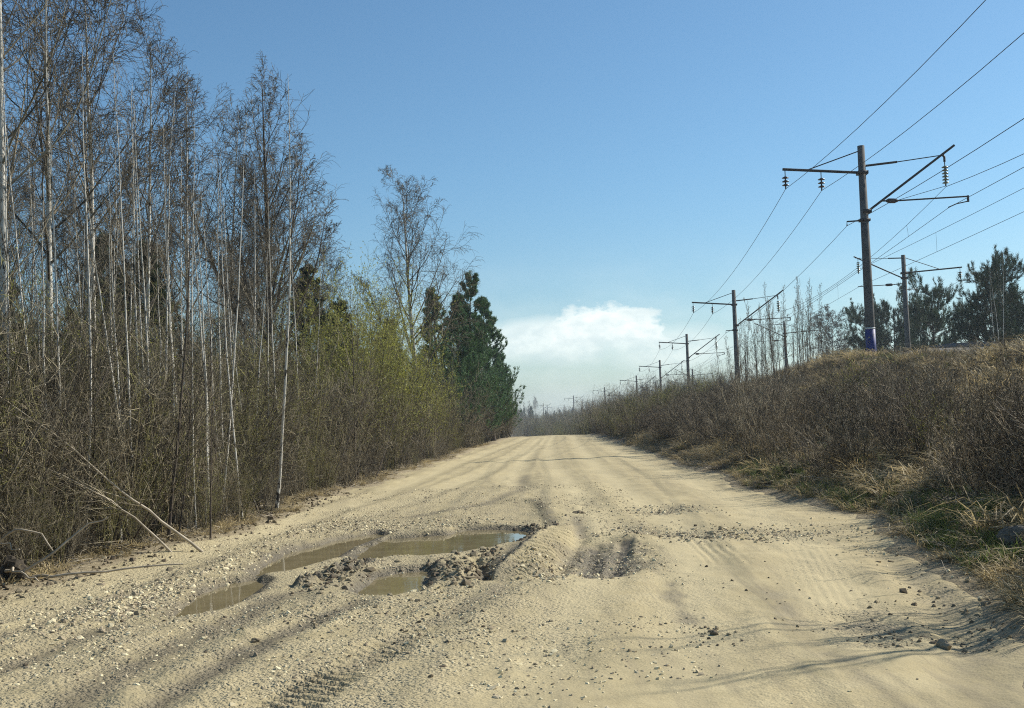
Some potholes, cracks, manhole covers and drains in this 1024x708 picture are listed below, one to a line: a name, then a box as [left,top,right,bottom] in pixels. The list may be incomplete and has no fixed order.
pothole [346,561,442,596]
pothole [336,524,536,560]
pothole [542,534,658,579]
pothole [155,574,275,617]
